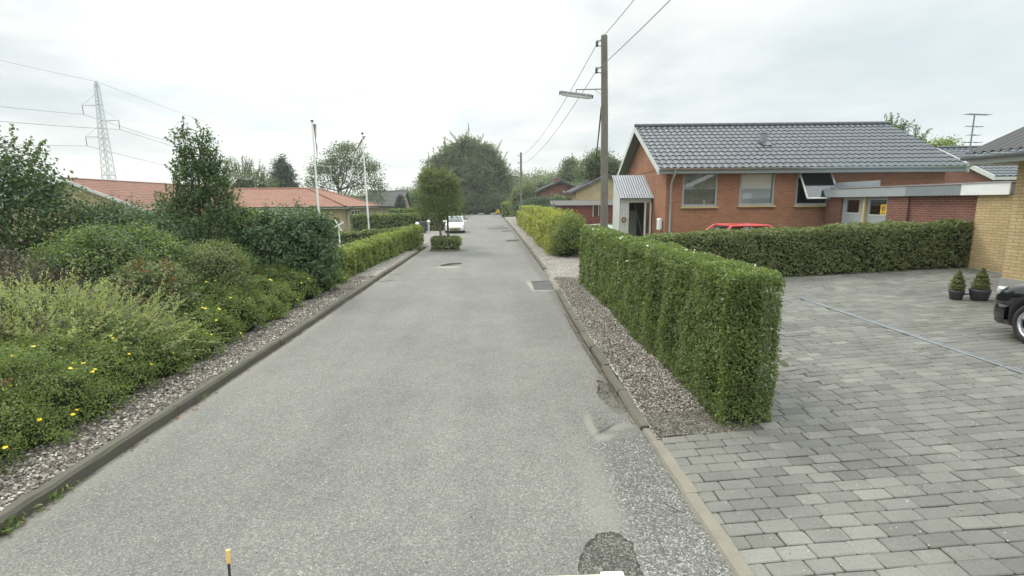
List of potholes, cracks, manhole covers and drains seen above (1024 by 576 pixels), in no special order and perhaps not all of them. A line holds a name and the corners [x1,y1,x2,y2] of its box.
pothole [596,380,620,408]
pothole [578,531,644,576]
